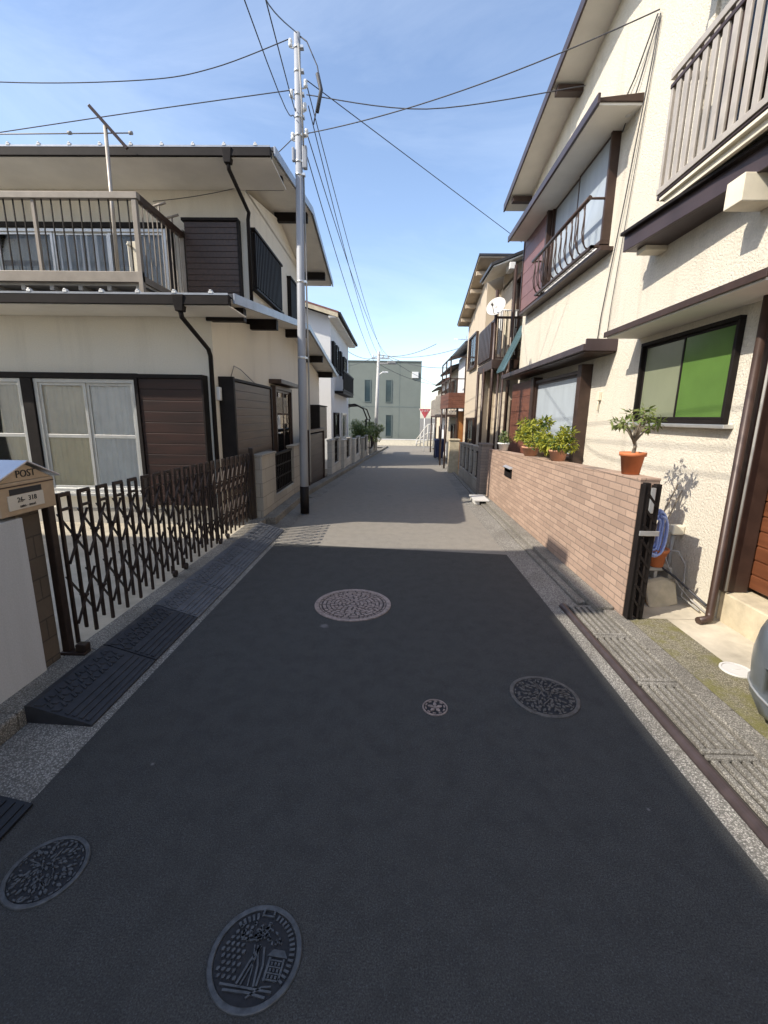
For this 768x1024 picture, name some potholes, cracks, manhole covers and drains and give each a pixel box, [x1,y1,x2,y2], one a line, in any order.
manhole cover [510,676,581,719]
manhole cover [206,905,302,1017]
manhole cover [422,699,448,716]
manhole cover [315,589,391,622]
manhole cover [0,835,91,911]
